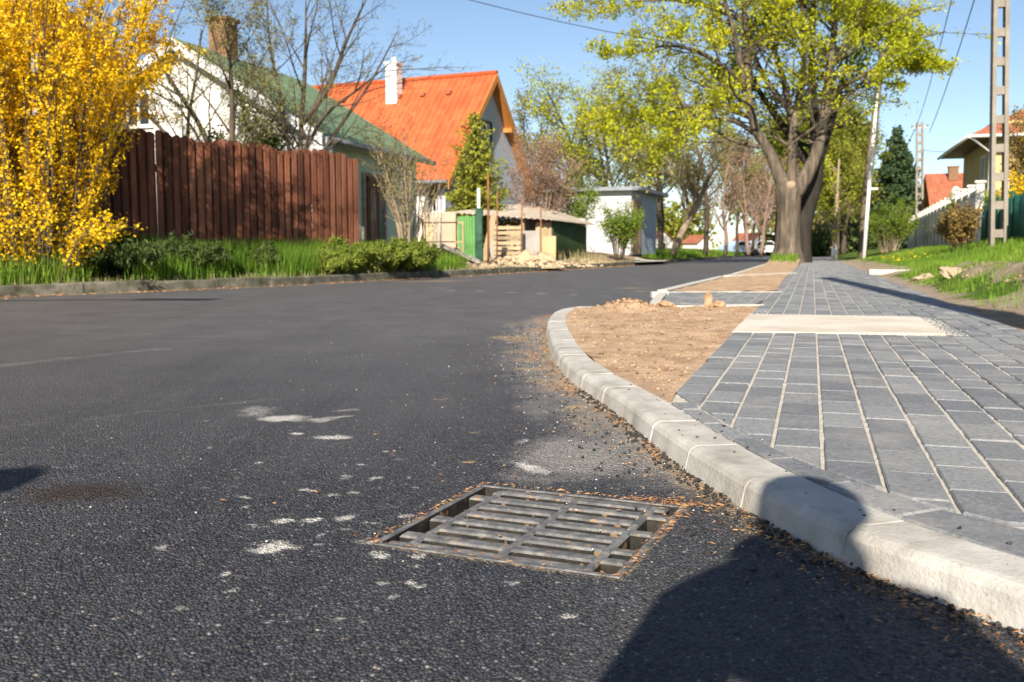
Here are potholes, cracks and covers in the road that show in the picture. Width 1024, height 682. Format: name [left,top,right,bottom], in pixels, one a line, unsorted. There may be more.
drain grate [371,484,687,580]
